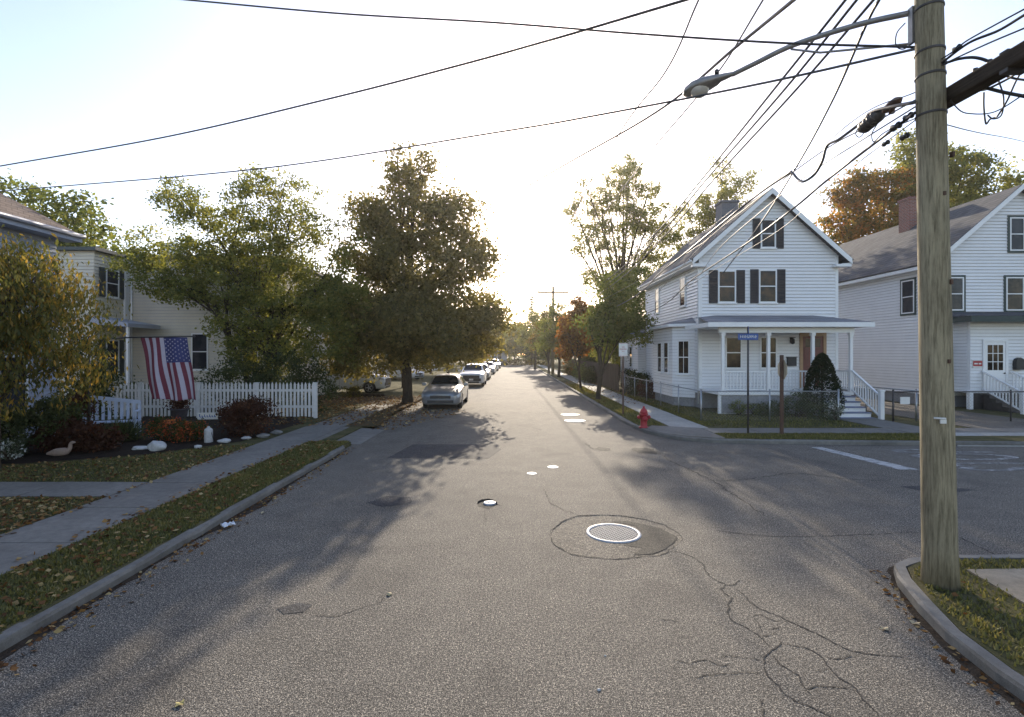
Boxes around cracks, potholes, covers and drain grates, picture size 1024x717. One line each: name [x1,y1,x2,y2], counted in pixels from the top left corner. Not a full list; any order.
crack [543,489,911,717]
manhole cover [586,523,641,543]
